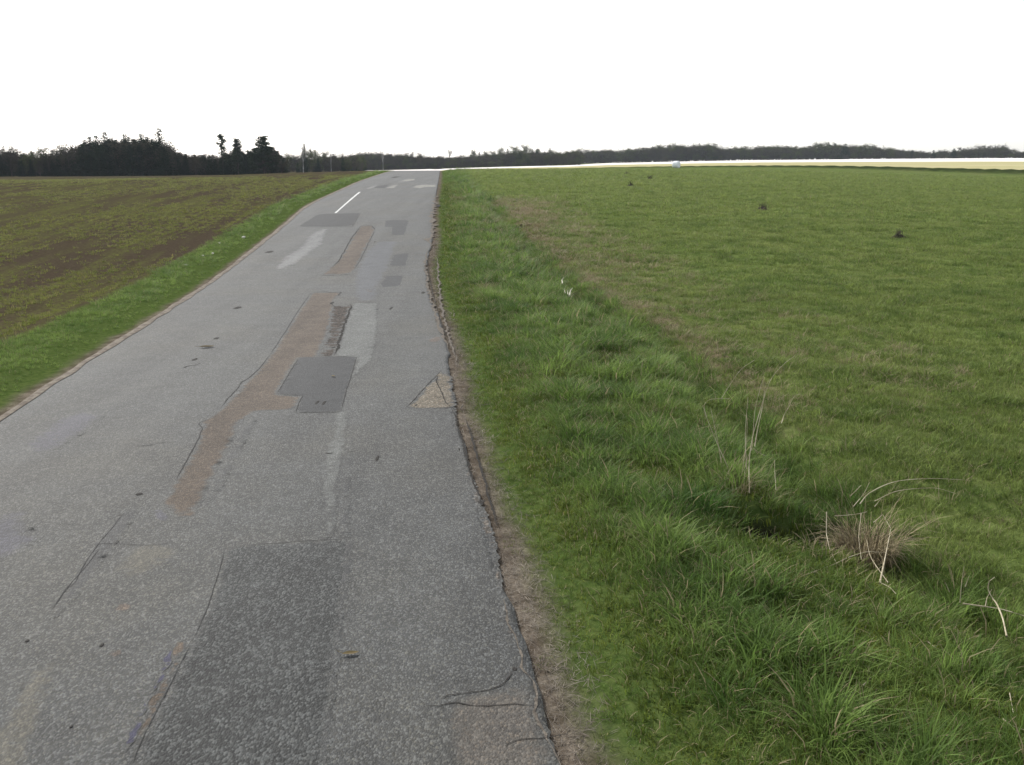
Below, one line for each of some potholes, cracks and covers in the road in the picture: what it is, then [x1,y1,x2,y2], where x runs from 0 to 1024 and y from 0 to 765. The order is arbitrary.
crack [429,598,564,765]
crack [52,514,175,609]
crack [177,421,203,477]
